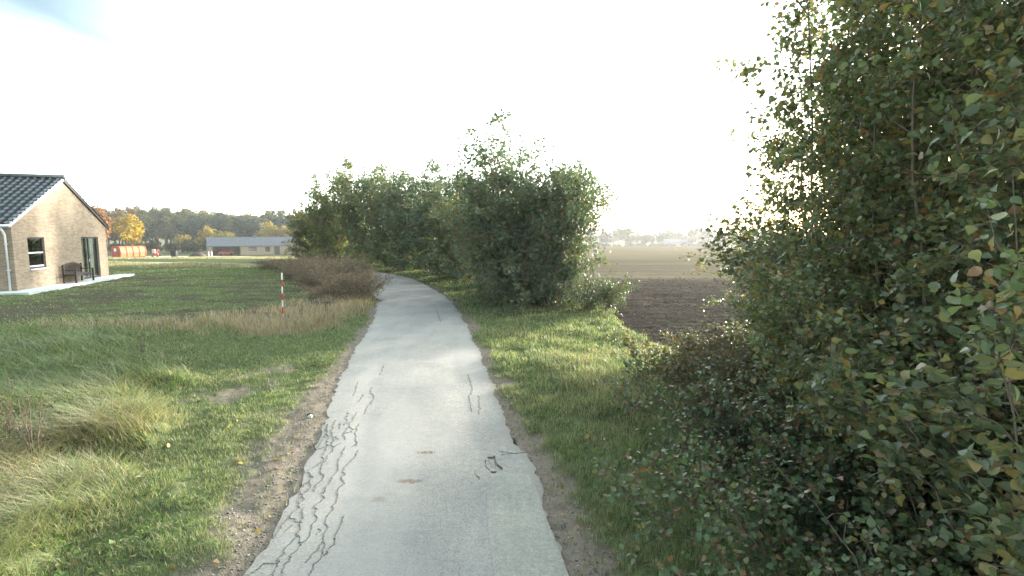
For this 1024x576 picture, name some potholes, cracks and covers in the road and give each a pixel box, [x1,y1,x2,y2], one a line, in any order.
crack [247,383,374,576]
